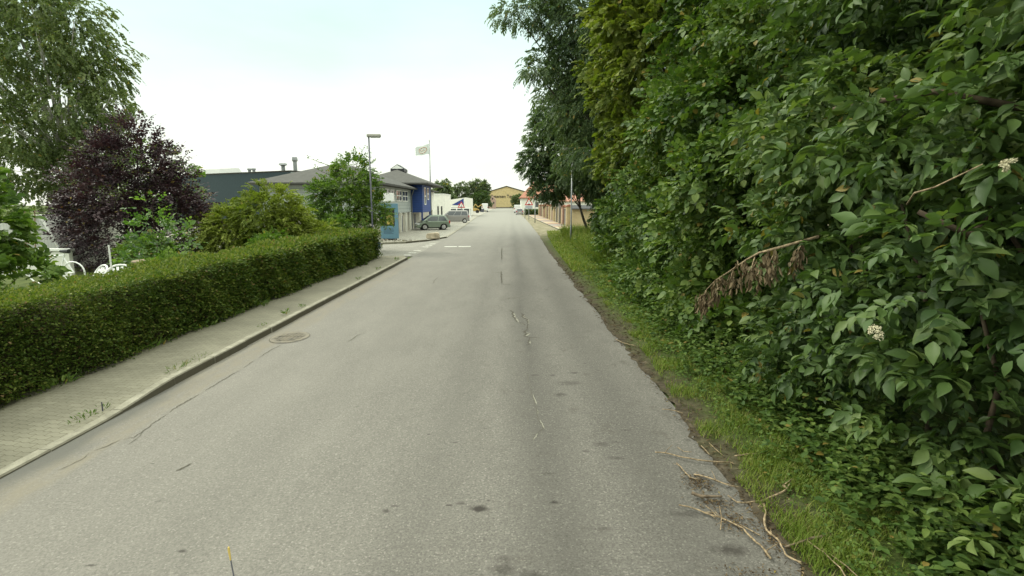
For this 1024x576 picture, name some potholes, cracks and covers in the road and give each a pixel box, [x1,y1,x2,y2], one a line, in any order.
crack [64,348,274,468]
manhole cover [269,332,310,343]
crack [501,247,536,345]
